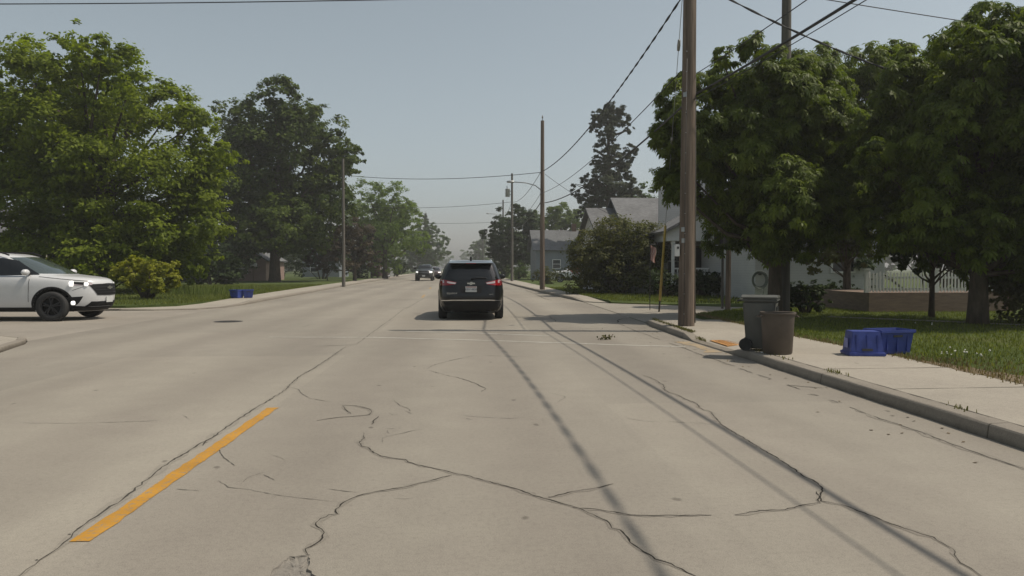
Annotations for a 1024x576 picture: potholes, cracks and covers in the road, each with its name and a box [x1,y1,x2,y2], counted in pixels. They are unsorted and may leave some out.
crack [17,306,982,576]
